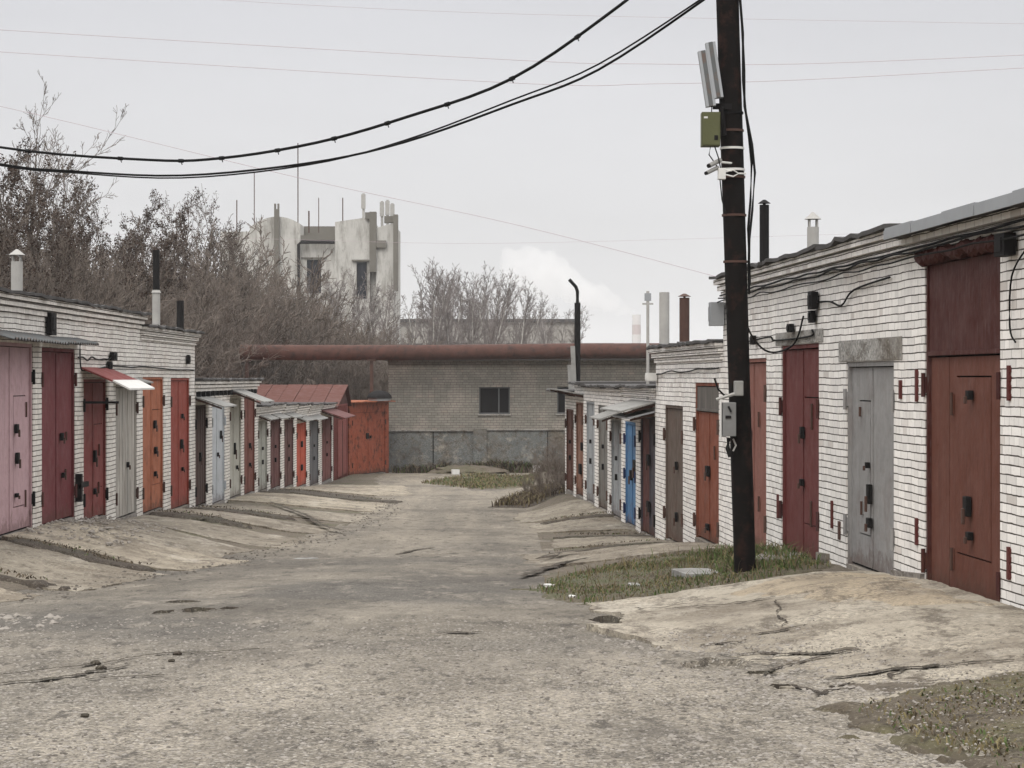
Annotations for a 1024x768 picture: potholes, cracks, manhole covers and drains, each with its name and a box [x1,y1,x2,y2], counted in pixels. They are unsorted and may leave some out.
crack [0,648,260,683]
crack [518,549,592,576]
crack [635,596,1013,696]
pothole [584,615,621,623]
